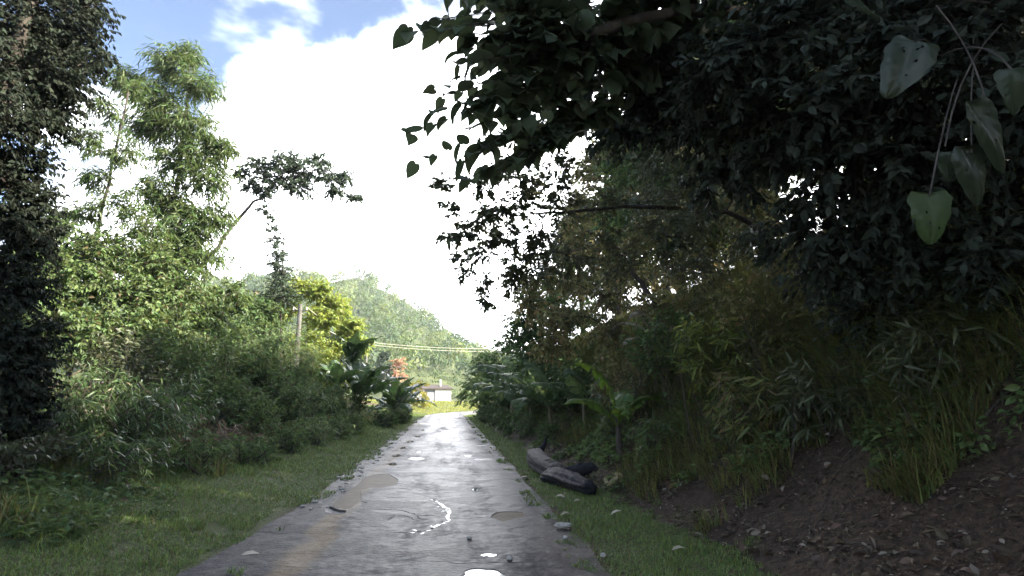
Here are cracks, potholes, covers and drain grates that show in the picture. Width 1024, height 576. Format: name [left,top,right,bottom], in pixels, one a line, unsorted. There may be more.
pothole [461,568,506,576]
crack [362,488,451,534]
pothole [491,511,526,522]
